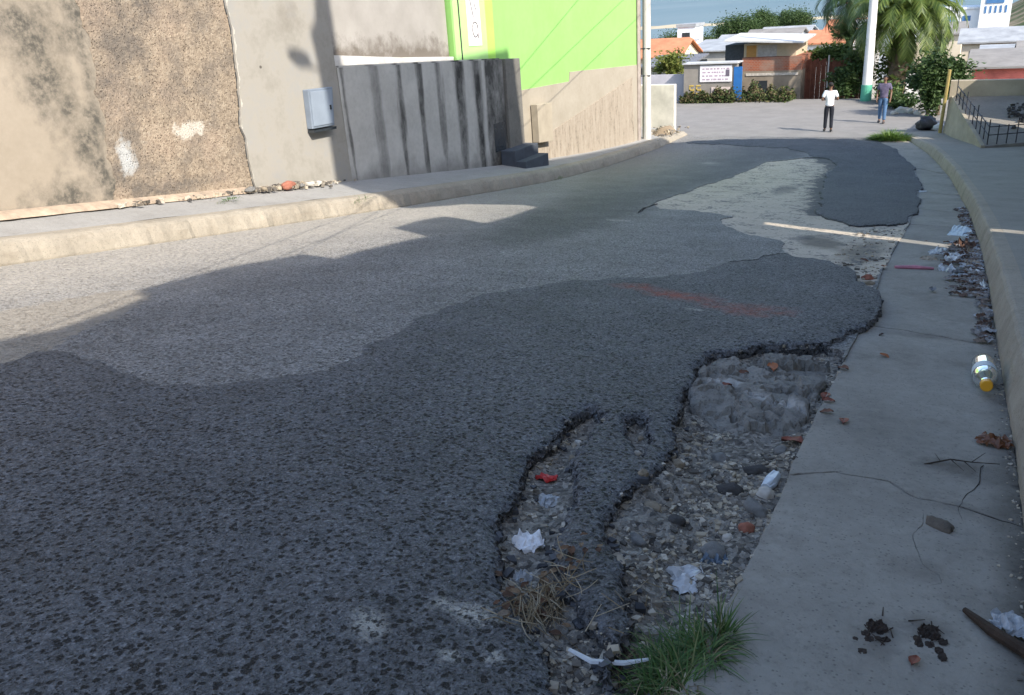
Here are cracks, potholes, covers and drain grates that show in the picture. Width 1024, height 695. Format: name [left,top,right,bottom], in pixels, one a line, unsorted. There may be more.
crack [958,465,1023,528]
pothole [498,418,603,695]
pothole [604,353,841,695]
